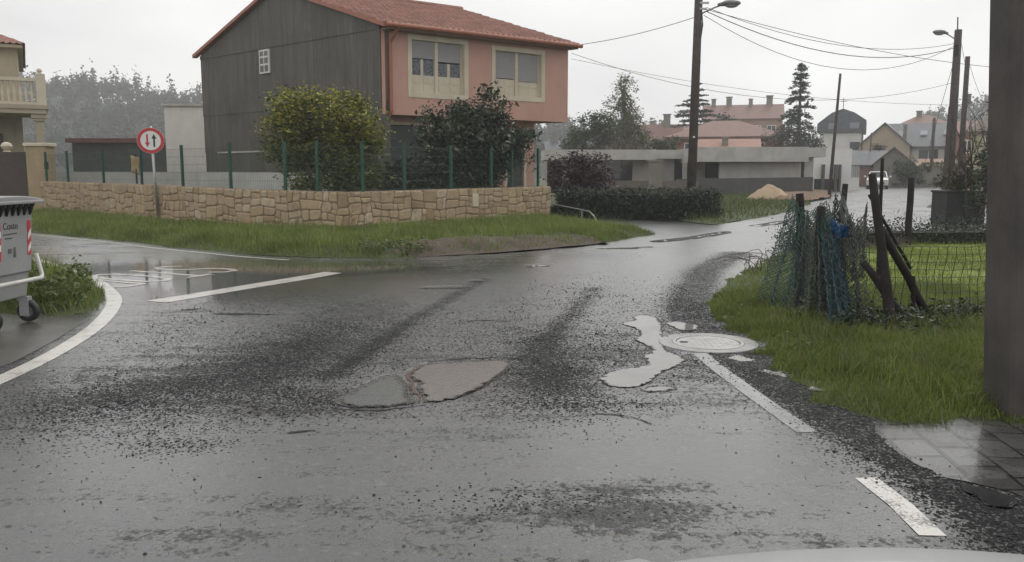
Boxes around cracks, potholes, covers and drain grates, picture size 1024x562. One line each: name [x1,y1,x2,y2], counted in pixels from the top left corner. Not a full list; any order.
pothole [666,321,699,331]
manhole cover [659,333,759,353]
crack [578,413,652,424]
pothole [961,484,1017,509]
pothole [598,315,686,388]
